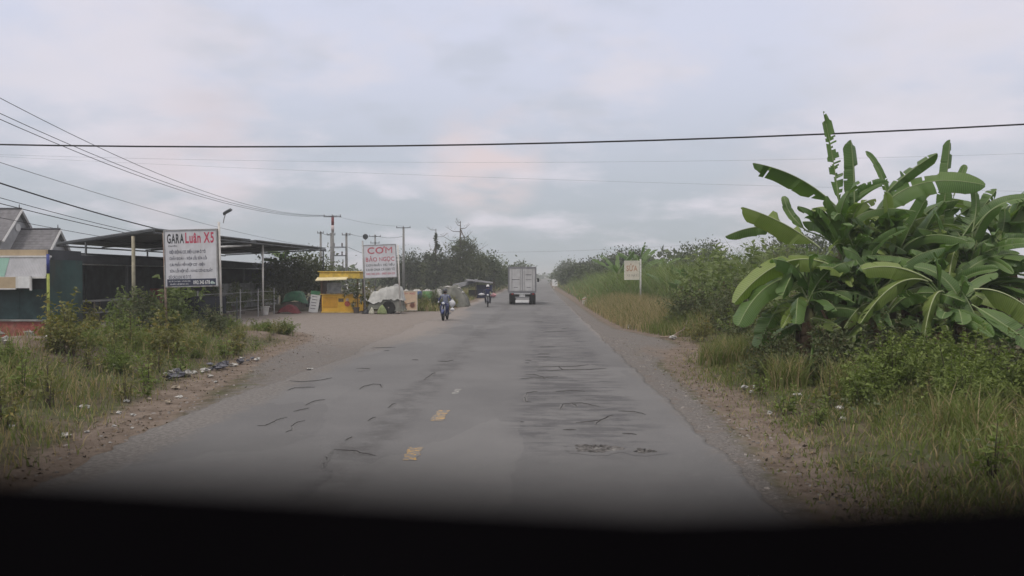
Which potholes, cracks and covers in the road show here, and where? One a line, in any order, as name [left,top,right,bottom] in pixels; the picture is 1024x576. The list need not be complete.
pothole [623,446,668,456]
pothole [563,442,637,456]
crack [521,356,646,435]
crack [320,359,454,469]
crack [257,378,330,432]
